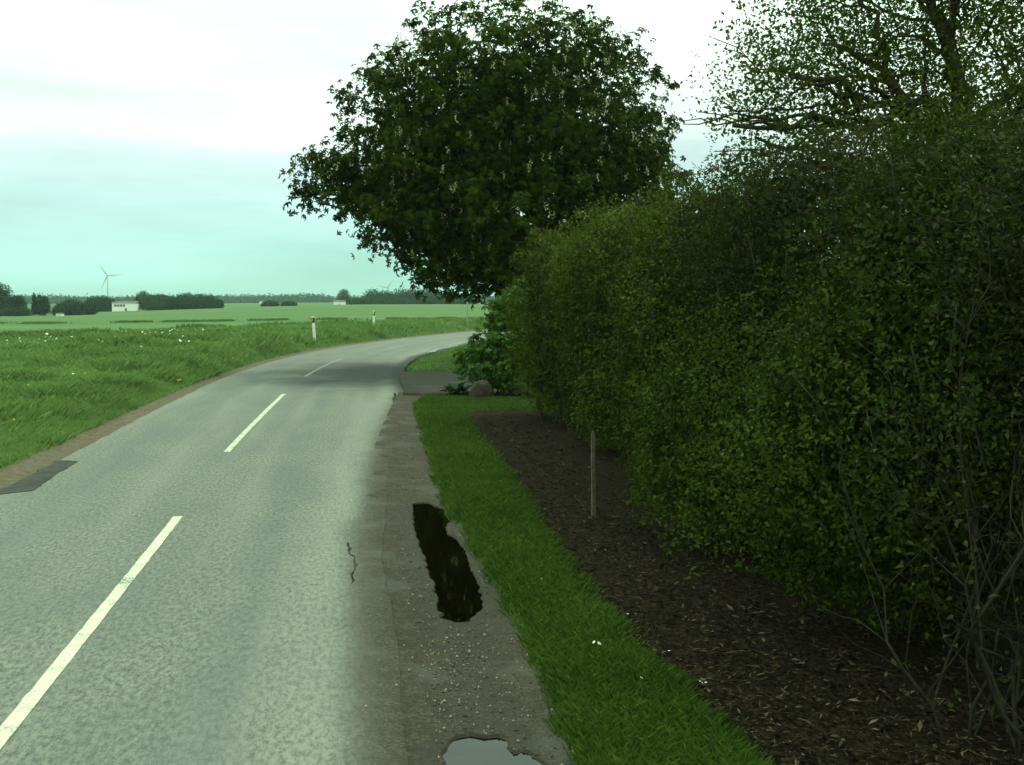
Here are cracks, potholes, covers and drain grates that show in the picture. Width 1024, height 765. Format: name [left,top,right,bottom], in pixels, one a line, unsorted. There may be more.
pothole [411,502,484,623]
pothole [440,733,551,765]
crack [347,542,356,584]
